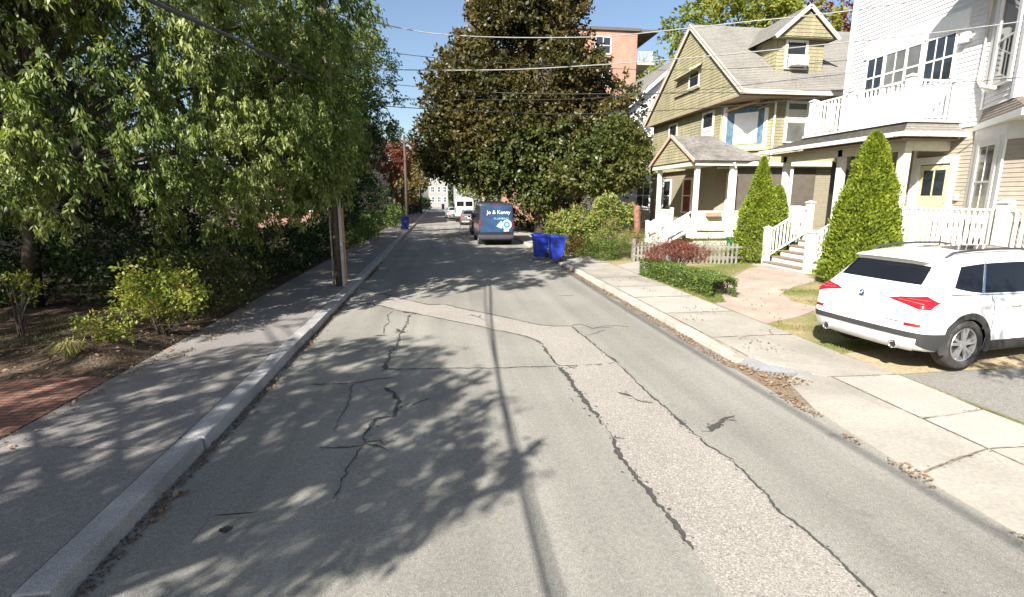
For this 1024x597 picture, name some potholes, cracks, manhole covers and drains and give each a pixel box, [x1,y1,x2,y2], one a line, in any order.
crack [315,288,878,597]
